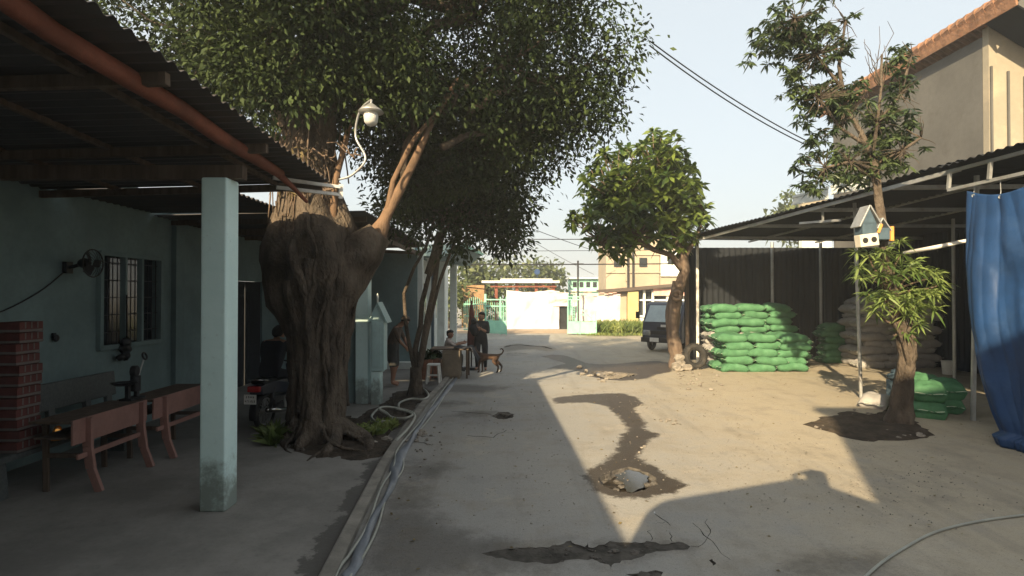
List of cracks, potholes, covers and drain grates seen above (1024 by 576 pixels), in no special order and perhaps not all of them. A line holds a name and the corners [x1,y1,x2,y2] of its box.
pothole [591,371,637,380]
pothole [599,467,658,493]
crack [482,513,731,566]
